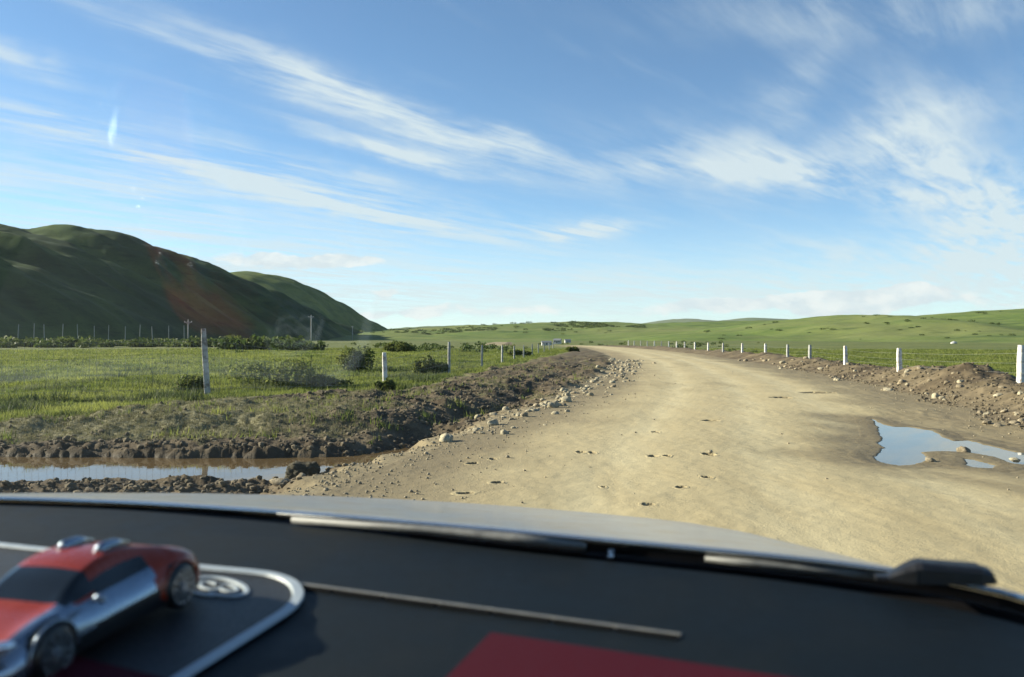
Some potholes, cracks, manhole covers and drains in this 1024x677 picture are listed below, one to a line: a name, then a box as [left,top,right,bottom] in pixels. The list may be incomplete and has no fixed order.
pothole [847,417,1024,472]
